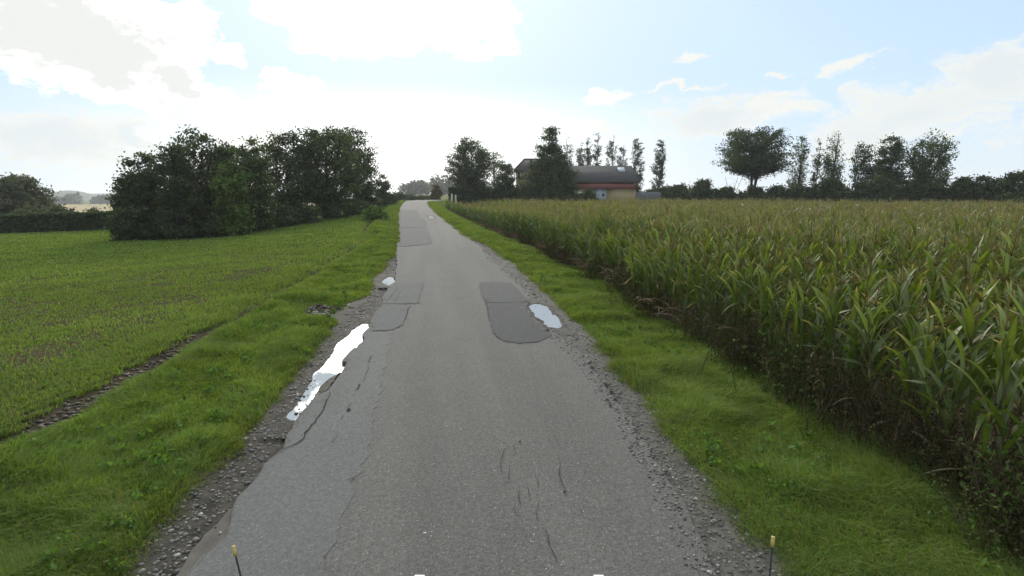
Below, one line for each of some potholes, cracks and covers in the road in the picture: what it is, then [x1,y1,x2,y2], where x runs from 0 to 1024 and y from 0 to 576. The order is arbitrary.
pothole [378,276,395,286]
crack [498,444,558,562]
pothole [274,322,370,422]
pothole [527,303,568,329]
crack [264,355,372,460]
